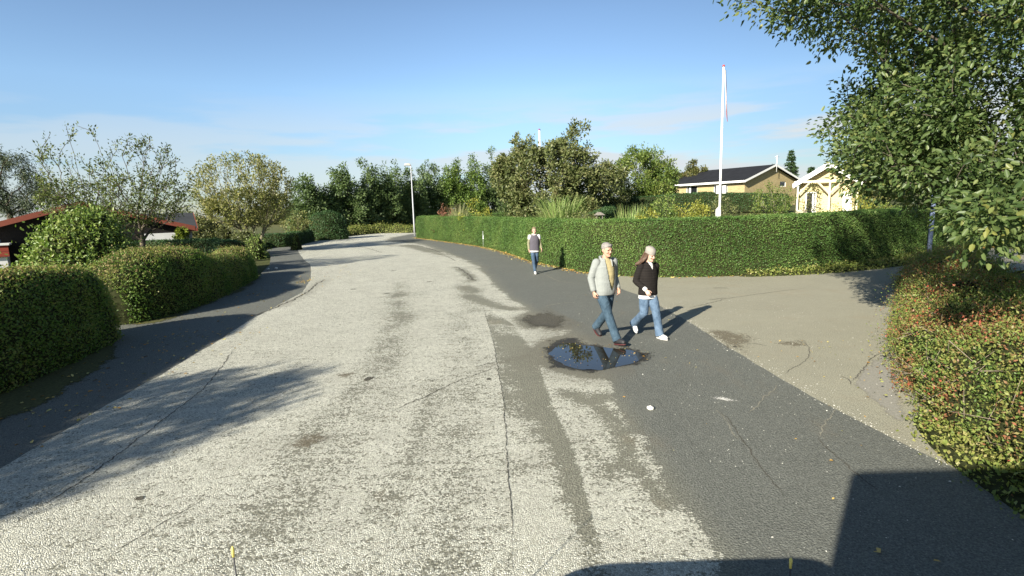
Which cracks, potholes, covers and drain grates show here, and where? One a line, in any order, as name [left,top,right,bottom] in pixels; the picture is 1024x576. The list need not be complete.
crack [820,408,877,489]
crack [716,389,785,498]
pothole [544,337,651,373]
